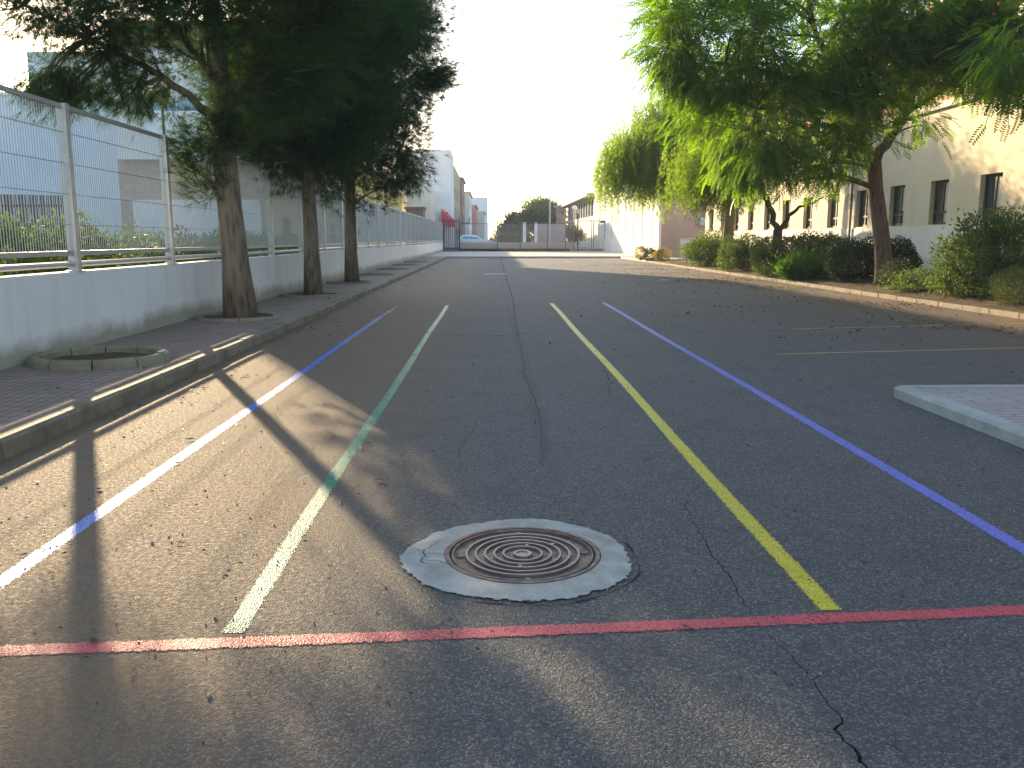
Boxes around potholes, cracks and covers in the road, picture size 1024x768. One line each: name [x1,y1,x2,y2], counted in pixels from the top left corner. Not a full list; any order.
crack [684,480,751,613]
manhole cover [398,518,632,602]
crack [452,259,543,474]
crack [763,631,904,768]
